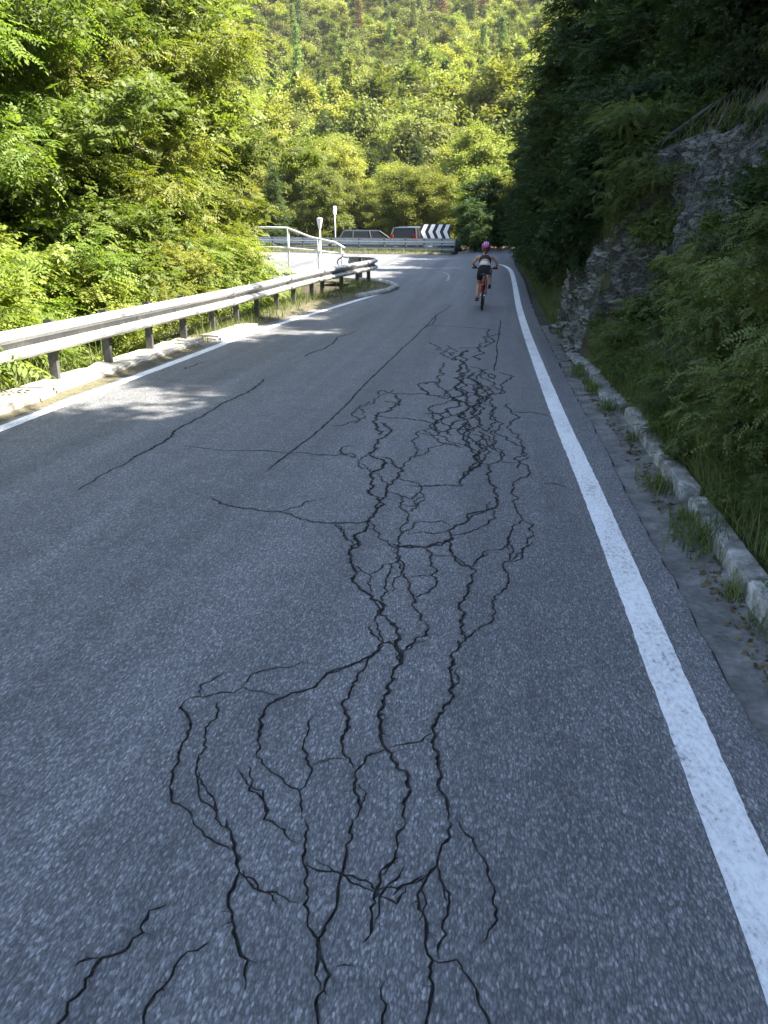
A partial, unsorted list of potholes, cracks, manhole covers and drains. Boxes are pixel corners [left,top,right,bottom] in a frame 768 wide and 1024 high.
crack [57,320,534,1024]
